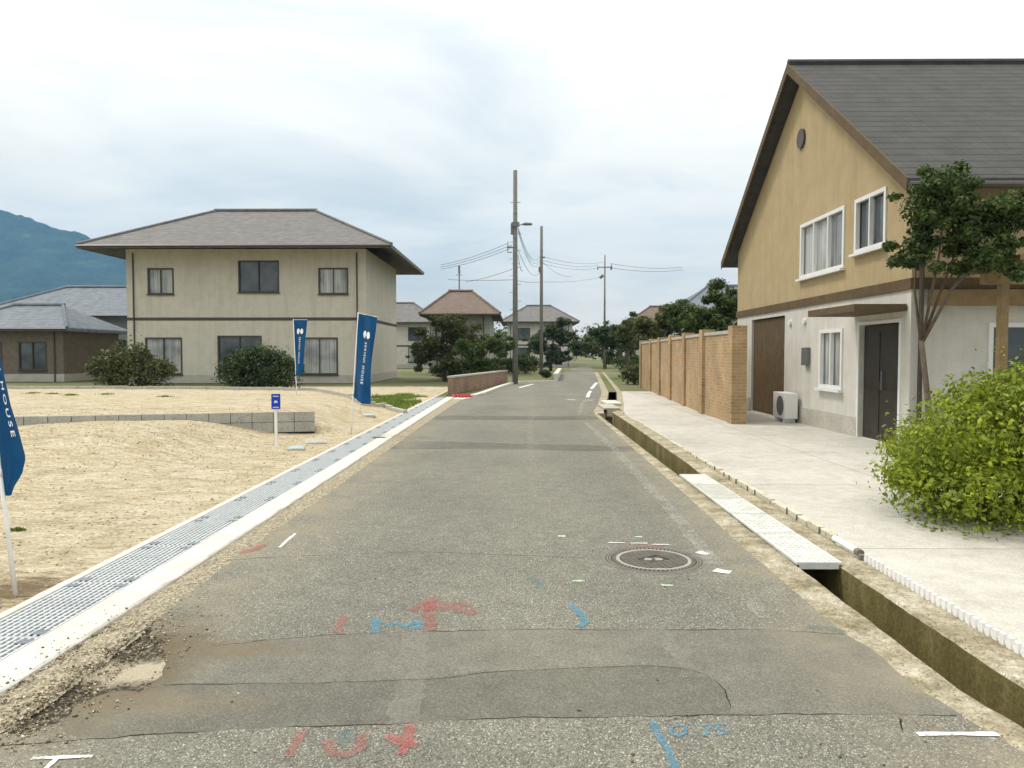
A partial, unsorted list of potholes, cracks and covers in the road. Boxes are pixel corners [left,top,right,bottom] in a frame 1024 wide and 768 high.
drain grate [0,583,132,638]
pothole [0,623,167,735]
drain grate [294,460,340,471]
drain grate [74,546,194,583]
drain grate [199,499,274,519]
drain grate [269,470,322,483]
manhole cover [602,546,706,574]
drain grate [313,451,355,460]
drain grate [238,483,301,499]
drain grate [0,637,39,661]
drain grate [146,519,240,546]
